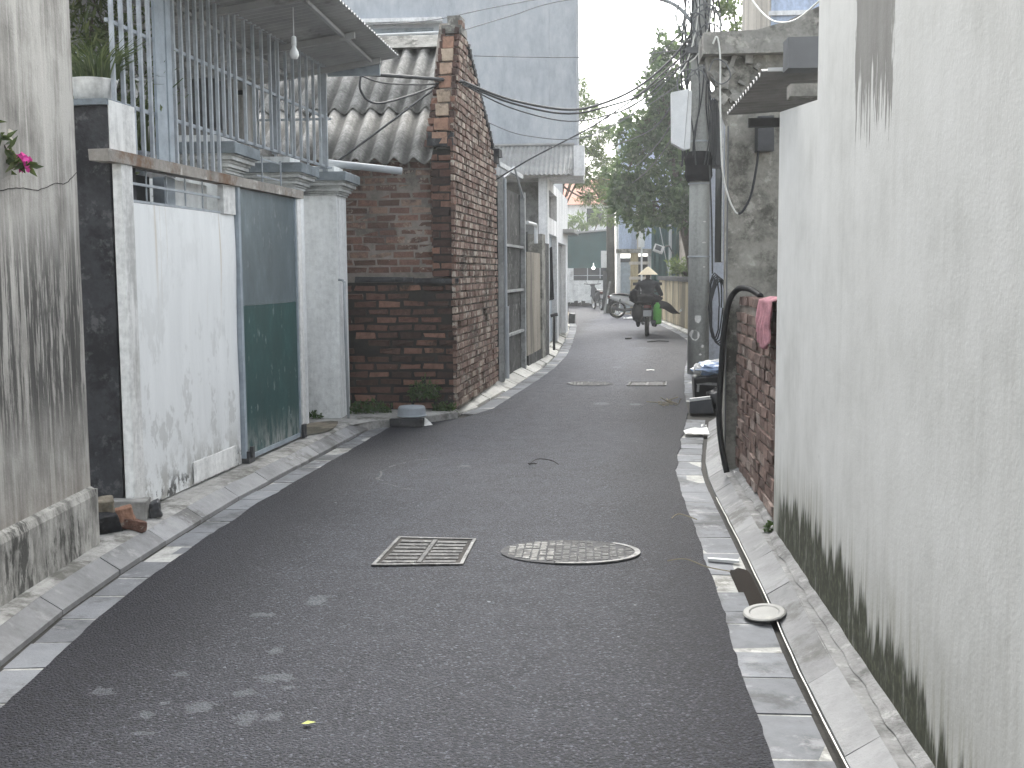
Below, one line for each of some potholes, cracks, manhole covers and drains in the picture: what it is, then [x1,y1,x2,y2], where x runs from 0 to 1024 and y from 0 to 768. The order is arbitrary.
manhole cover [501,540,640,564]
